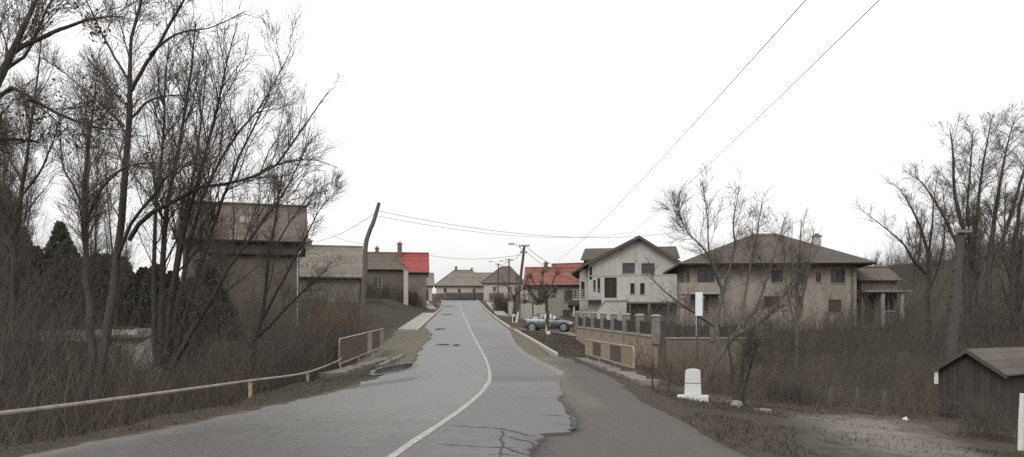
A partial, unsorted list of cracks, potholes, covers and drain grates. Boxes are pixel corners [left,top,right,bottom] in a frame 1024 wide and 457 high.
crack [445,425,537,457]
